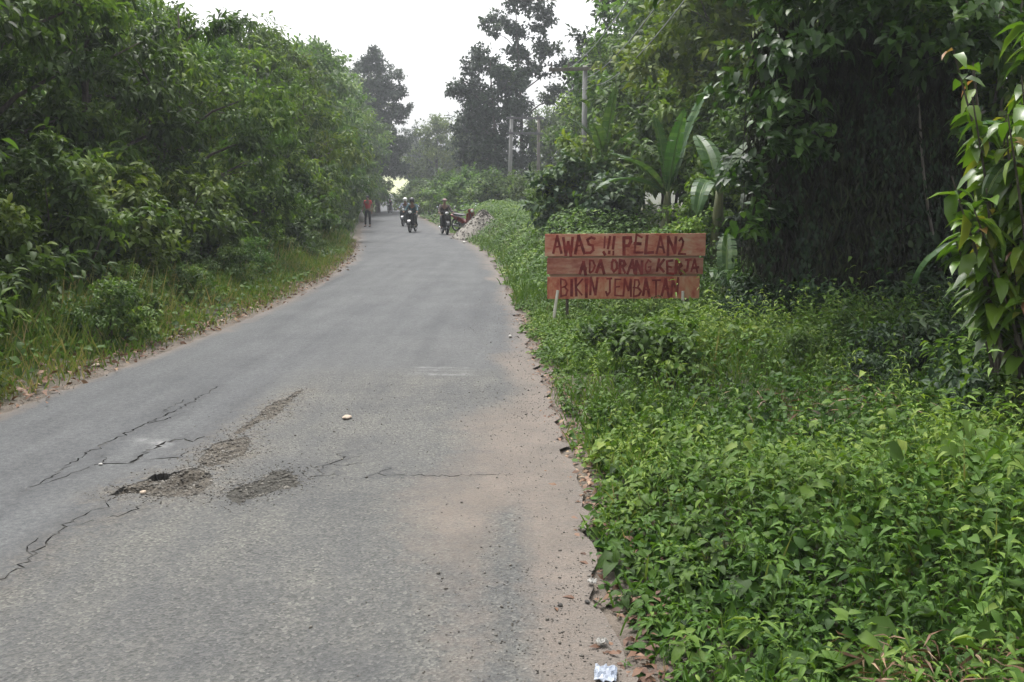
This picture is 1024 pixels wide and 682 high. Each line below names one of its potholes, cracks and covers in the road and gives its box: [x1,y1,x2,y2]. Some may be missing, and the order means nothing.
crack [0,498,147,580]
crack [21,386,217,492]
pothole [203,461,329,512]
pothole [76,460,241,509]
crack [302,453,513,478]
